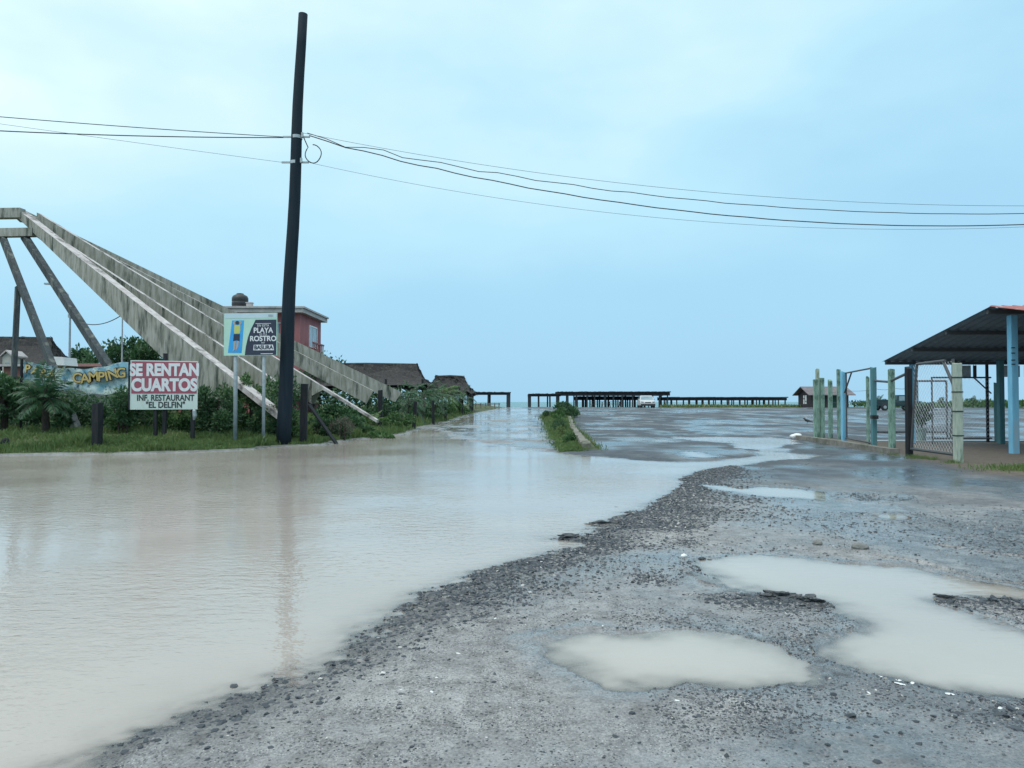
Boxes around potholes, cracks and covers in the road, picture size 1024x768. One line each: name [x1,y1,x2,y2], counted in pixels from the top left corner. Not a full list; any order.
pothole [676,552,1024,712]
pothole [700,484,845,502]
